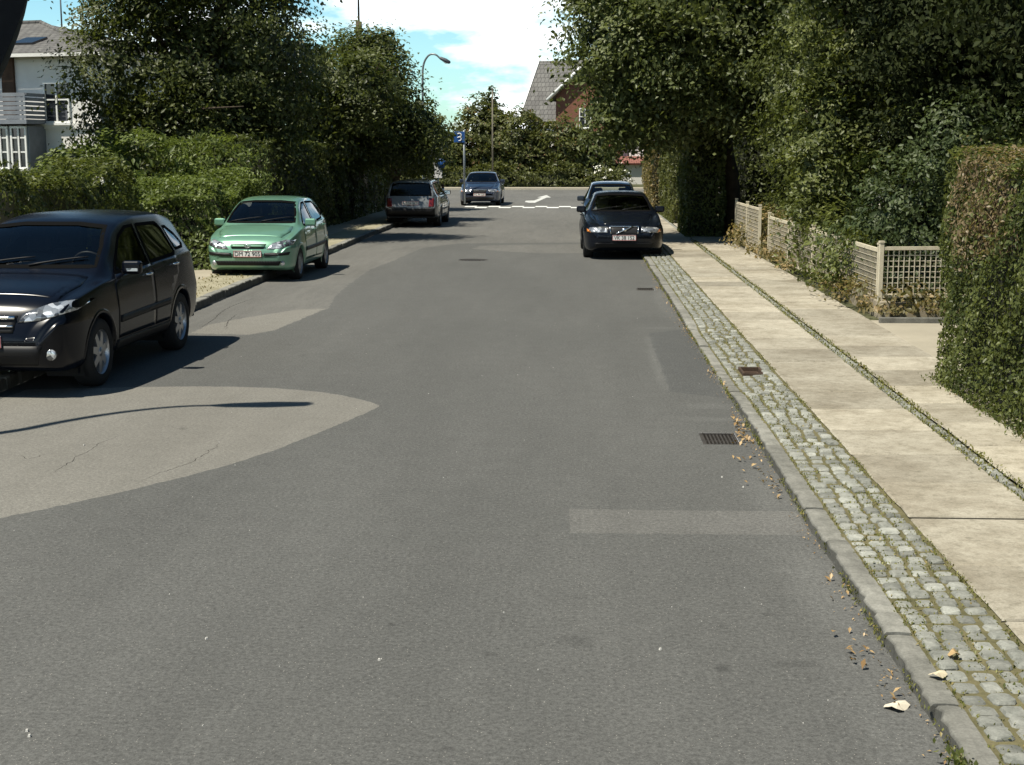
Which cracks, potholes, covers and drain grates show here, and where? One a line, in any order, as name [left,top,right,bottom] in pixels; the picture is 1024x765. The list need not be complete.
utility cover [738,367,763,376]
drain grate [699,433,740,445]
